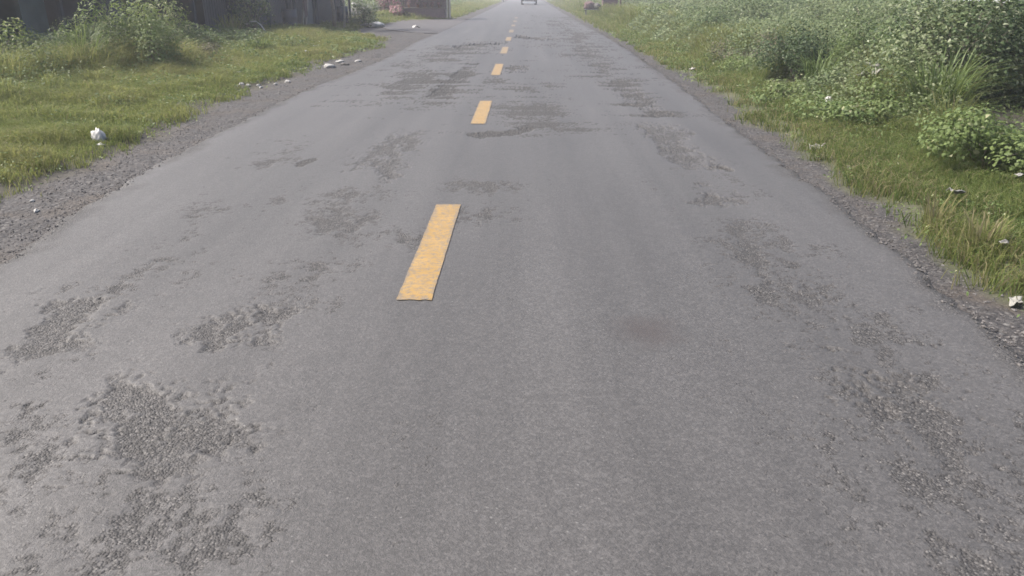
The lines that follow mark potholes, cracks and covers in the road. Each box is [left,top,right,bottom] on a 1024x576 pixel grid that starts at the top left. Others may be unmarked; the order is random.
pothole [0,295,132,373]
pothole [426,62,481,97]
pothole [175,304,313,353]
pothole [631,122,722,171]
pothole [824,343,923,418]
pothole [342,129,434,183]
pothole [59,368,277,482]
